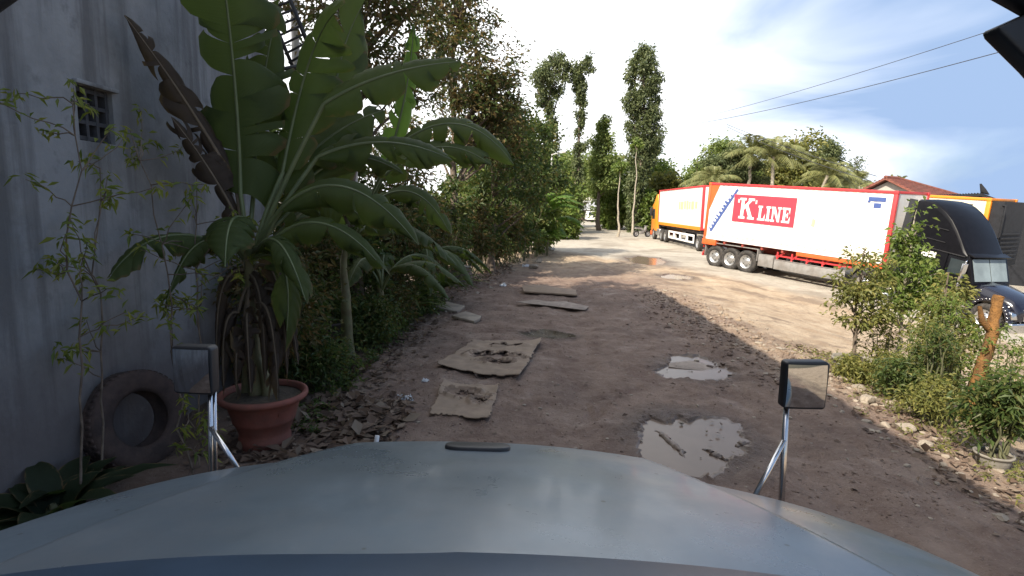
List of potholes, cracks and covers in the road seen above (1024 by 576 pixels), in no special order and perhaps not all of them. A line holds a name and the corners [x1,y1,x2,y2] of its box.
pothole [514,329,583,341]
pothole [624,411,764,486]
pothole [651,272,699,281]
pothole [618,255,673,268]
pothole [646,350,748,387]
